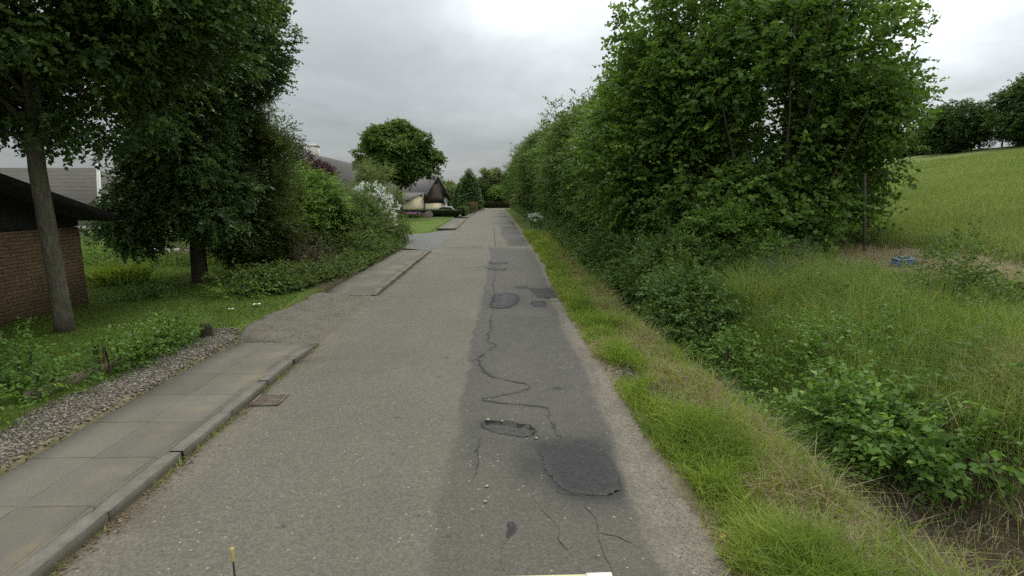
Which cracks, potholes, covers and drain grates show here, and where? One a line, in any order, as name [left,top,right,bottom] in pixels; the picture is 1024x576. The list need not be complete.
pothole [481,420,536,437]
drain grate [248,394,289,407]
crack [472,323,561,437]
crack [543,491,631,569]
